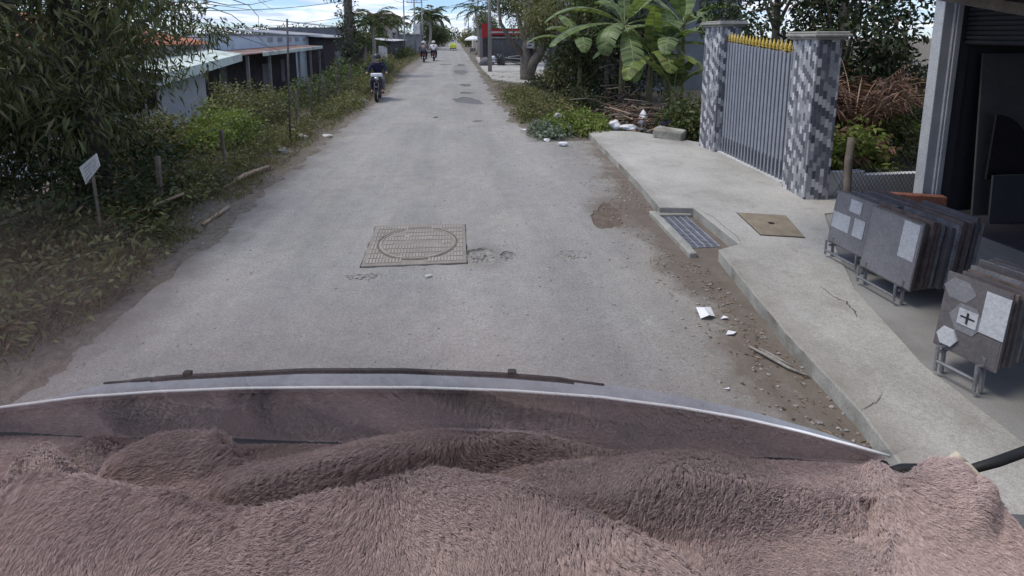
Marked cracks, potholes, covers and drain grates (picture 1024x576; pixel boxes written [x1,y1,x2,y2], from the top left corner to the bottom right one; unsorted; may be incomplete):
pothole [500,251,516,261]
pothole [590,203,623,229]
pothole [555,250,591,262]
pothole [345,273,388,281]
utility cover [737,212,805,238]
pothole [466,246,499,265]
manhole cover [361,224,468,268]
drain grate [649,211,720,258]
